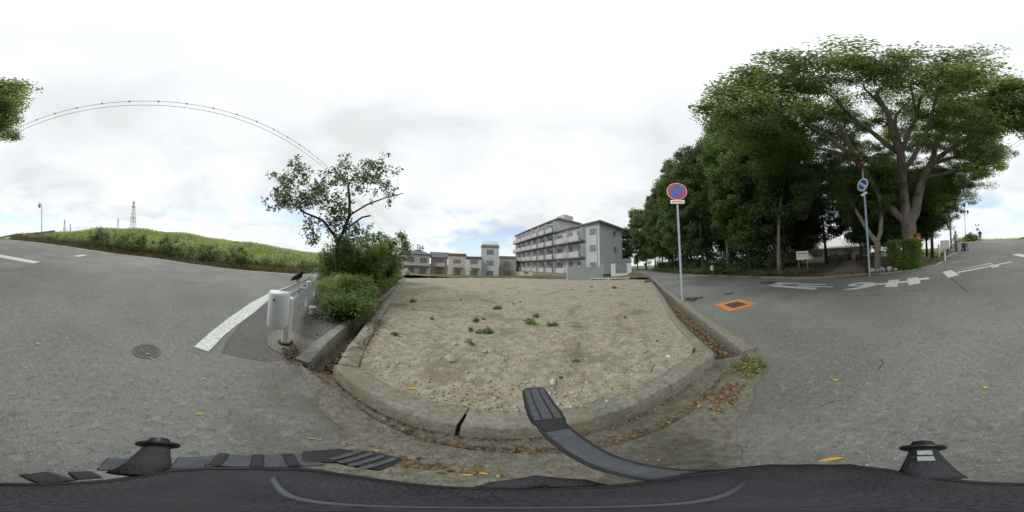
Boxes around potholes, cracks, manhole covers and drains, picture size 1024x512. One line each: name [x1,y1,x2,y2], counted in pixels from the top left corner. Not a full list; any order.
manhole cover [715,299,755,311]
manhole cover [132,344,161,359]
